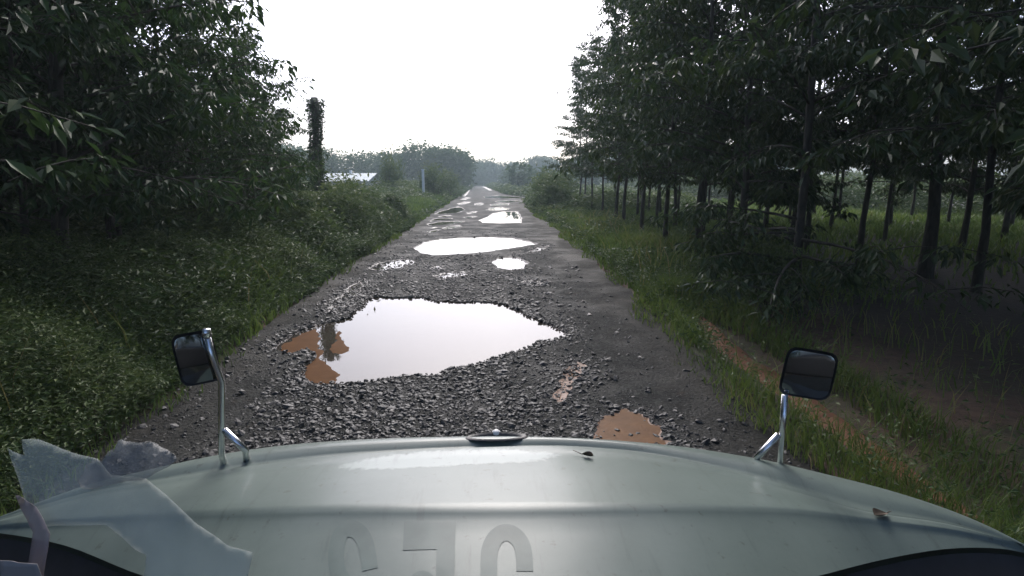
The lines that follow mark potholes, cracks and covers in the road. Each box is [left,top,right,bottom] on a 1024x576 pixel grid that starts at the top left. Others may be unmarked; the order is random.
pothole [272,296,569,384]
pothole [414,236,537,255]
pothole [592,408,672,445]
pothole [478,211,522,223]
pothole [369,259,414,270]
pothole [552,362,587,402]
pothole [491,256,529,270]
